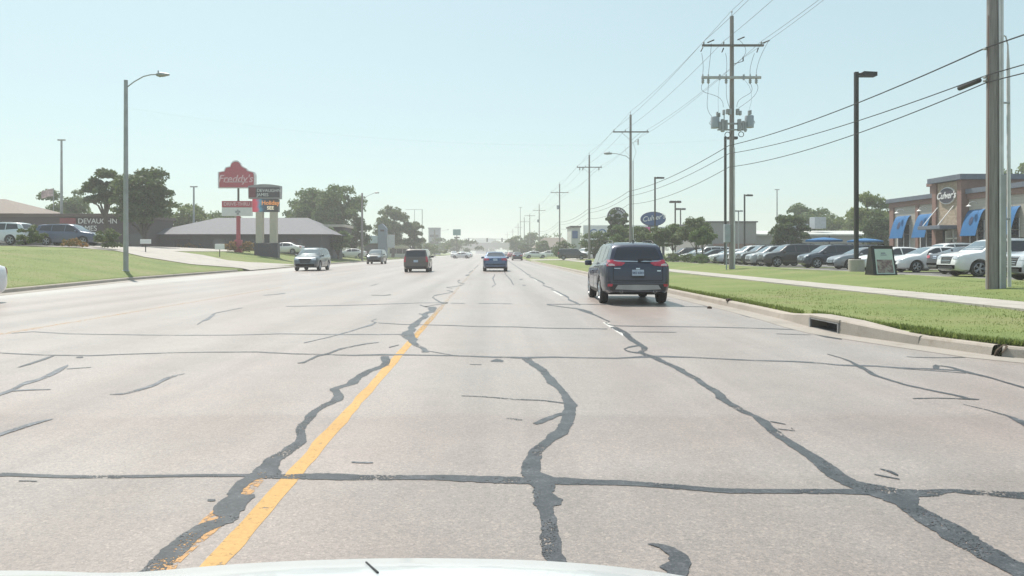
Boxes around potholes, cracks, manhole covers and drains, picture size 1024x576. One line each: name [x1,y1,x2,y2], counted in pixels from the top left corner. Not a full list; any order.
crack [933,364,1024,388]
crack [969,405,1024,425]
